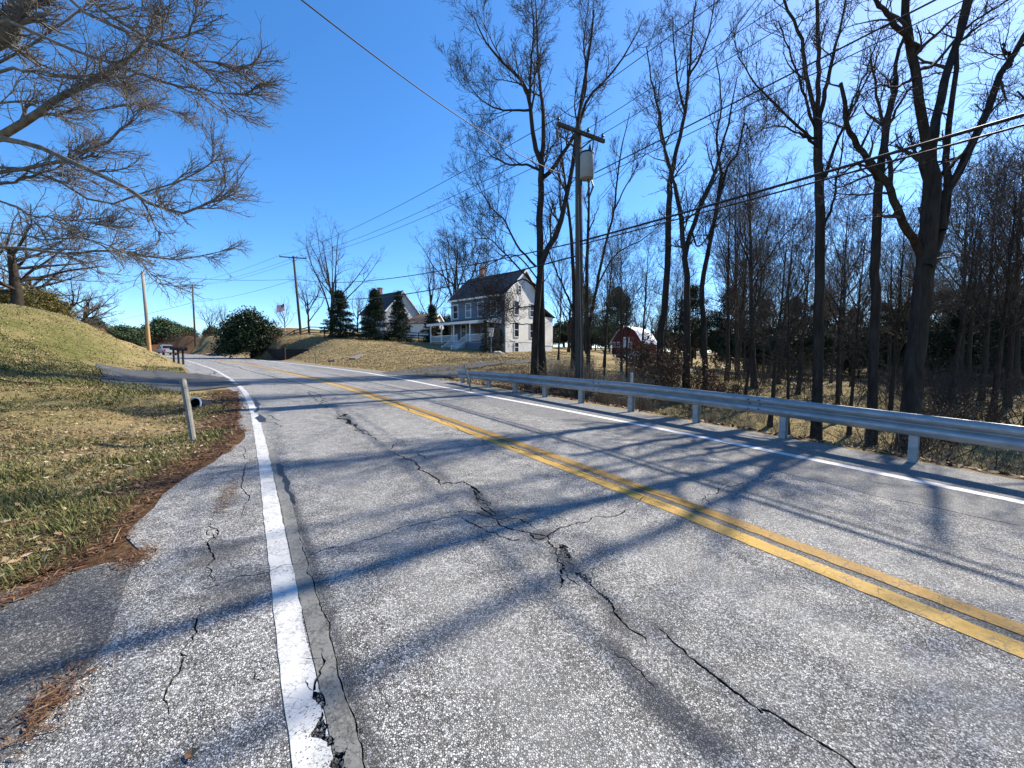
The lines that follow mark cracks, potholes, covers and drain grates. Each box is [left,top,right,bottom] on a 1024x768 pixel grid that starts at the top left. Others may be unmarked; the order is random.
crack [307,392,647,644]
crack [659,629,855,768]
crack [163,516,280,722]
